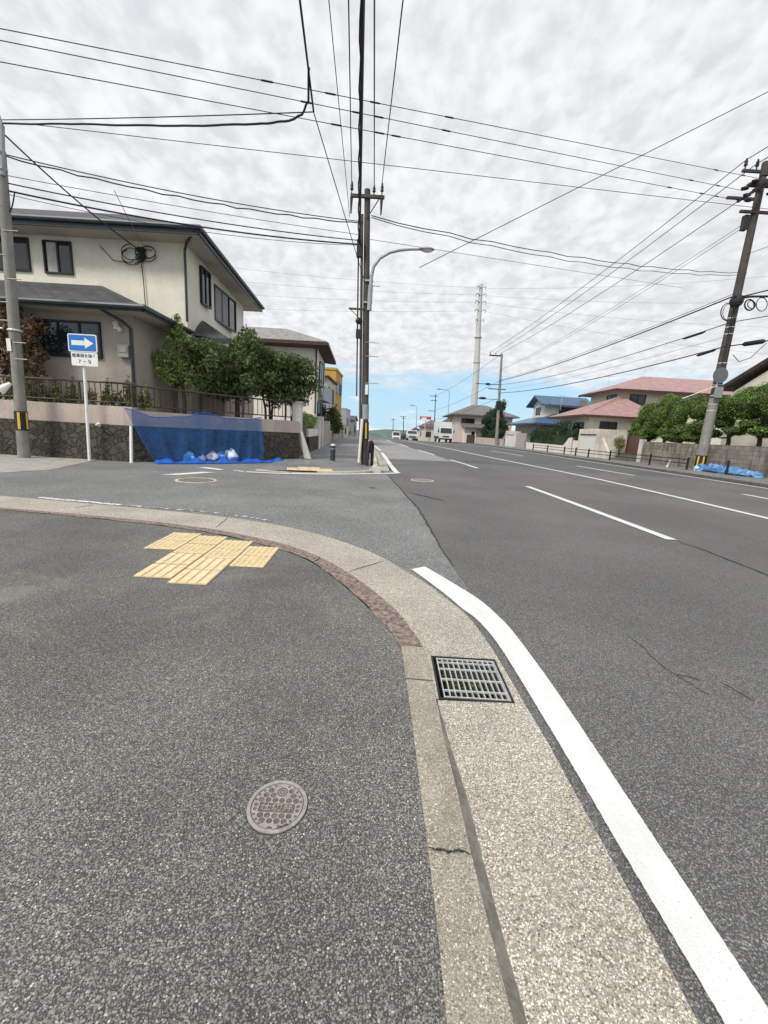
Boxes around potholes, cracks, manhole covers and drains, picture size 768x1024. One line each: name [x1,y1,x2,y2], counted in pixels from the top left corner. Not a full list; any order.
manhole cover [246,780,308,835]
crack [627,635,754,701]
drain grate [431,656,515,703]
crack [428,847,471,855]
